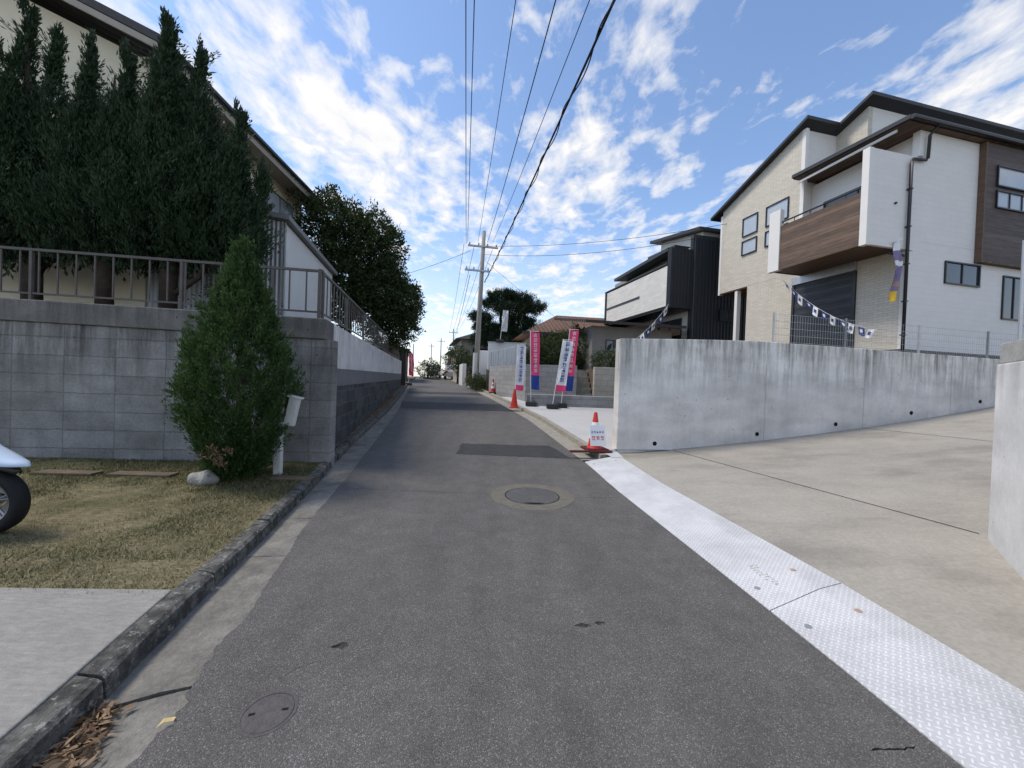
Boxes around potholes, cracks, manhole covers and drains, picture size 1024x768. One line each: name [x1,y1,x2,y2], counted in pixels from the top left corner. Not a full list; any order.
manhole cover [491,484,575,511]
manhole cover [236,691,299,738]
